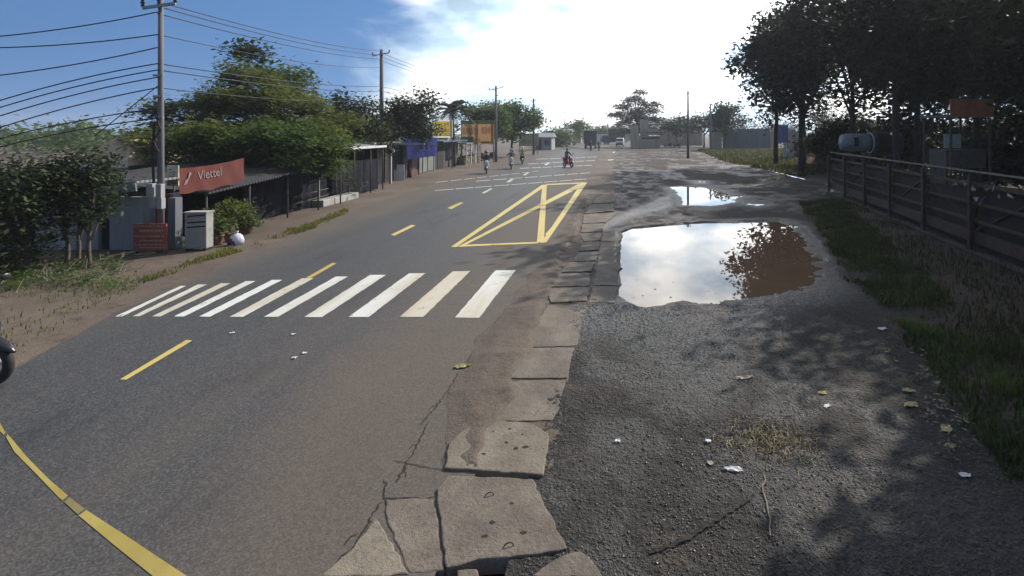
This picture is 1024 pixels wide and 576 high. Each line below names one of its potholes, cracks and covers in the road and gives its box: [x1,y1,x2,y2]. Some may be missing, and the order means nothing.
crack [649,496,754,553]
pothole [667,186,748,207]
pothole [610,218,845,316]
crack [338,318,498,560]
